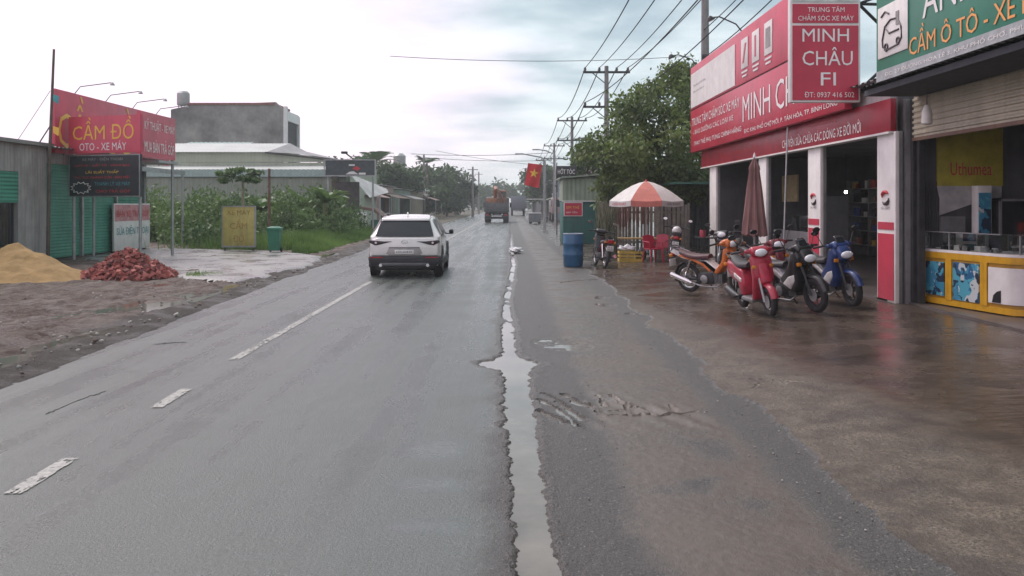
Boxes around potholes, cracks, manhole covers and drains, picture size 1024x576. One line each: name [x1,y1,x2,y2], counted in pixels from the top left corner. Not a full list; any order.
pothole [493,234,576,576]
